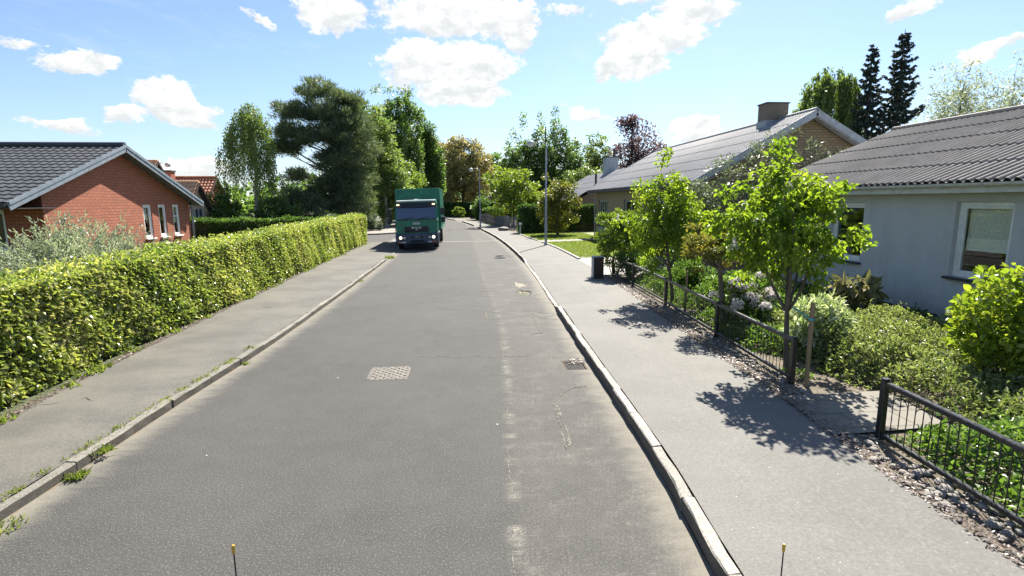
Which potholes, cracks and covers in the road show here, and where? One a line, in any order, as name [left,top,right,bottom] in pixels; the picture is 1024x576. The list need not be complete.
drain grate [561,361,588,370]
manhole cover [367,366,411,380]
